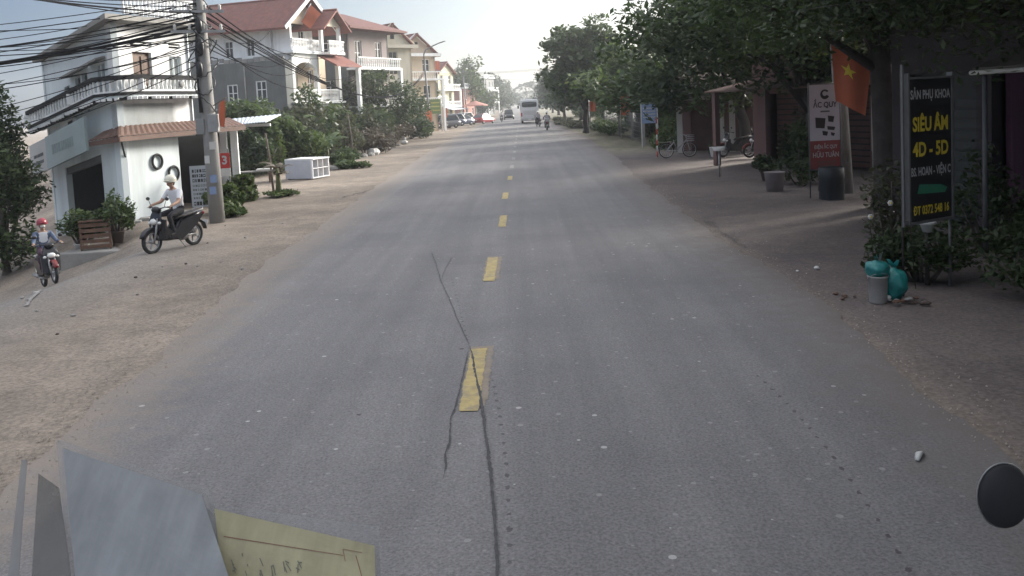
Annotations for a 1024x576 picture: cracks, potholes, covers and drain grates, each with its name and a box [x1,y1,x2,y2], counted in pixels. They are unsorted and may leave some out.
crack [432,254,499,576]
